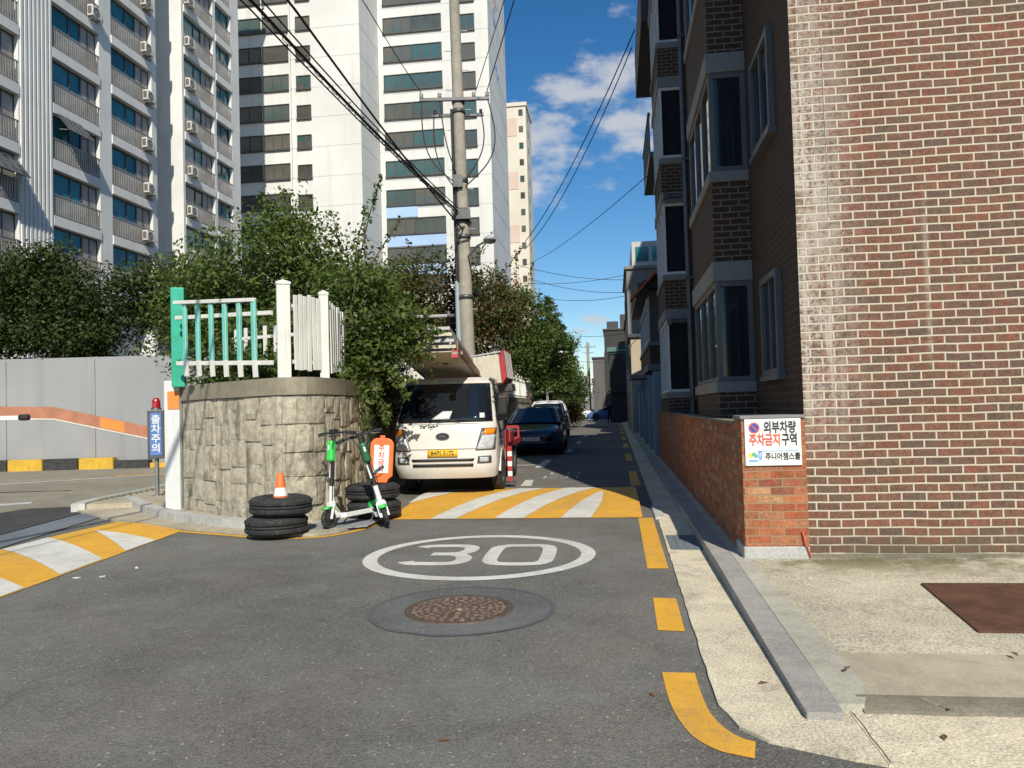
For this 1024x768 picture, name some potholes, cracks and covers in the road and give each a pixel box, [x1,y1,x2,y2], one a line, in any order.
manhole cover [367,586,555,636]
